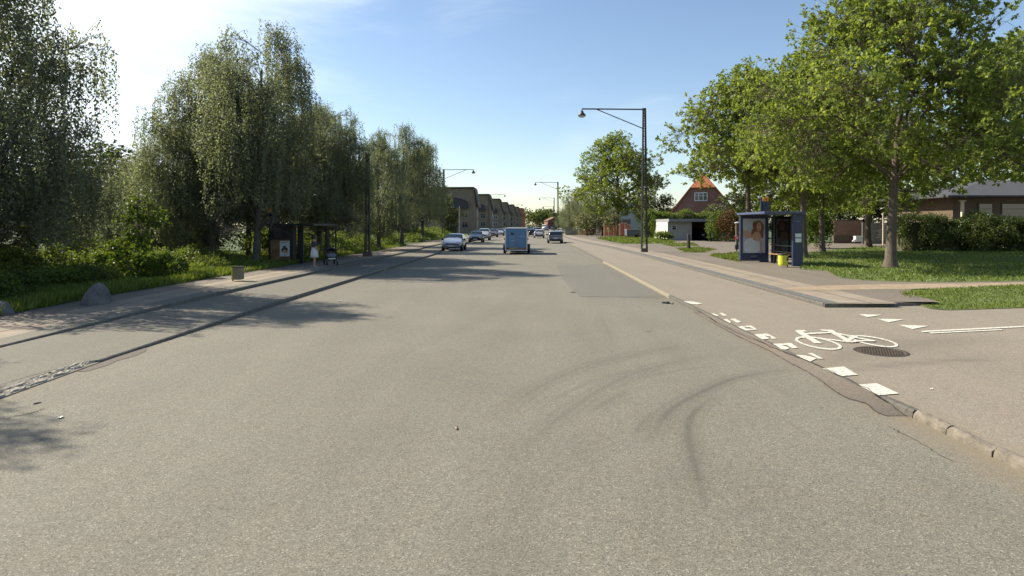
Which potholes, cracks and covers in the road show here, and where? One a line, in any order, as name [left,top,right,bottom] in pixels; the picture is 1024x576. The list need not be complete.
manhole cover [853,346,910,357]
